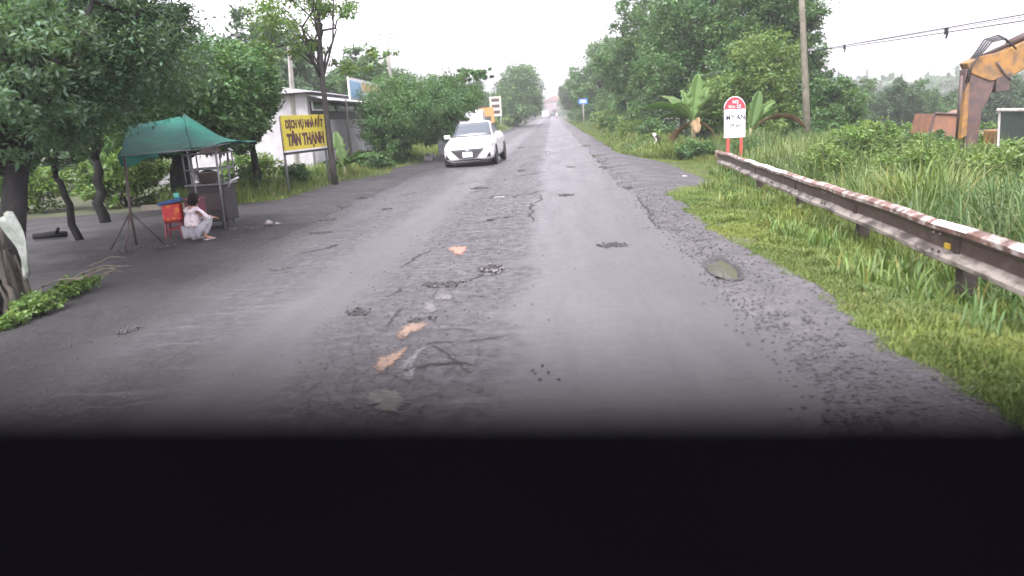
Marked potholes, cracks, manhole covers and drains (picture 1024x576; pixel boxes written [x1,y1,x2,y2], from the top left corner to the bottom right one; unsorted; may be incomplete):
pothole [421,279,471,288]
crack [404,328,500,372]
crack [386,250,431,326]
pothole [346,307,372,316]
pothole [116,325,144,335]
pothole [475,262,505,276]
